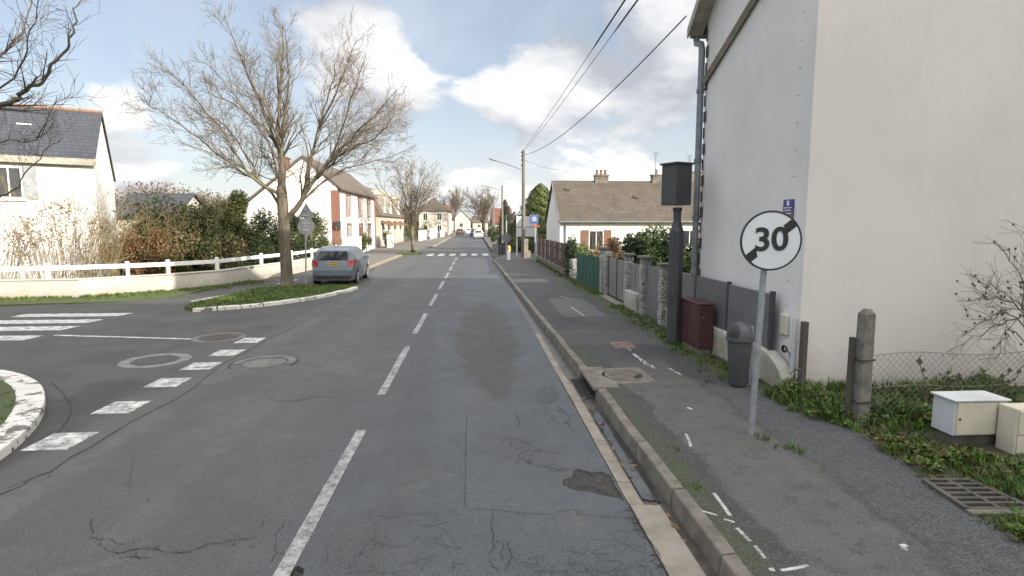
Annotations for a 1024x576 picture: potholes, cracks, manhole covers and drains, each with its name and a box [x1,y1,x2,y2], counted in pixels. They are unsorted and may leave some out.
manhole cover [117,353,193,369]
pothole [563,468,624,501]
crack [463,417,668,576]
crack [539,383,576,432]
crack [90,519,285,562]
manhole cover [232,355,297,368]
crack [319,506,466,574]
drain grate [921,478,1024,517]
manhole cover [602,367,657,384]
manhole cover [190,332,246,343]
